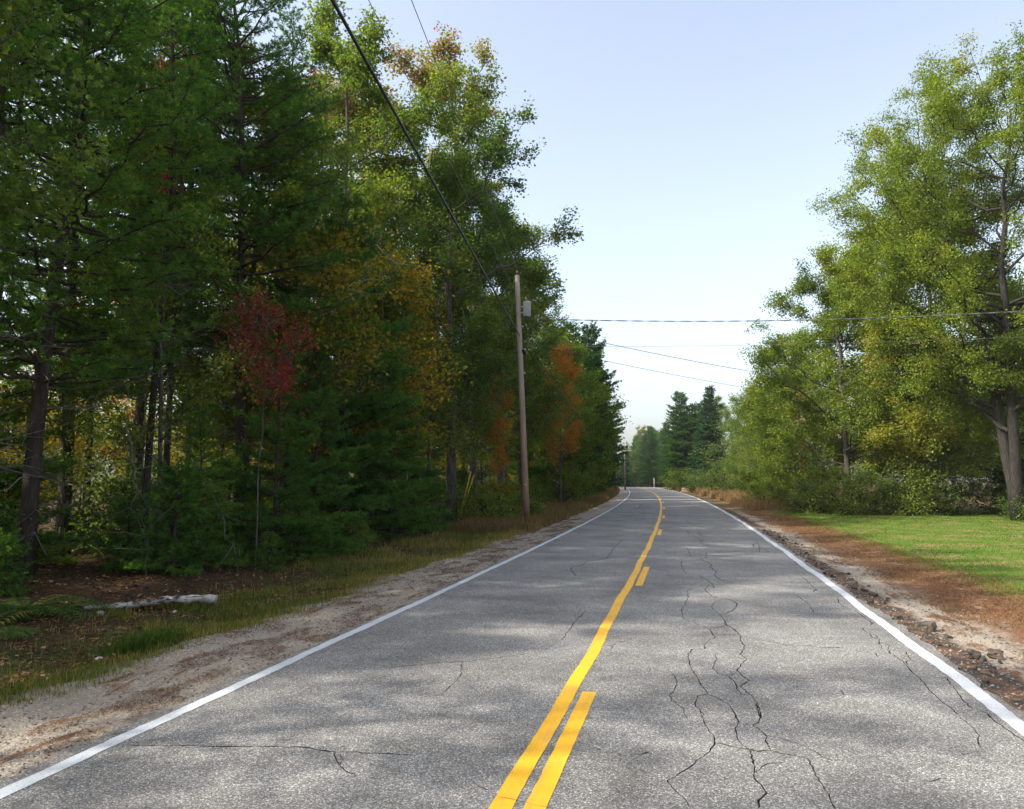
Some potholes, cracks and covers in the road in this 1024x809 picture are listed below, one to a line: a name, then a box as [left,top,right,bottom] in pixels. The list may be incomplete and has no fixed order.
crack [397,653,528,692]
crack [667,552,841,809]
crack [132,739,417,779]
crack [837,598,1024,755]
